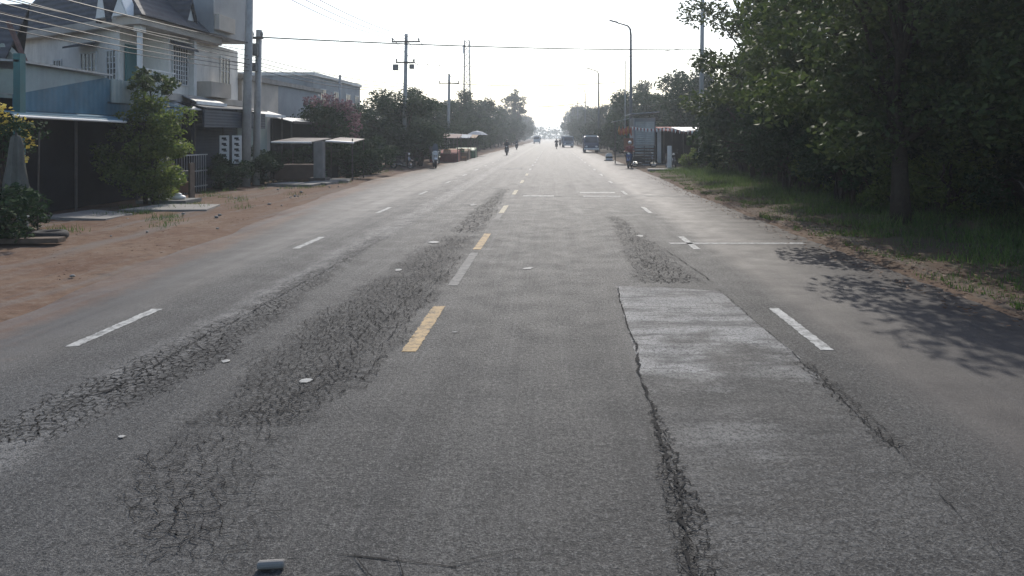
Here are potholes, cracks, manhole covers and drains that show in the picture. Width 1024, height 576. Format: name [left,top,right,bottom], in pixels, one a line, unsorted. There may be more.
crack [0,236,390,442]
crack [453,190,507,233]
crack [720,291,1004,558]
crack [607,217,728,576]
crack [336,550,513,576]
